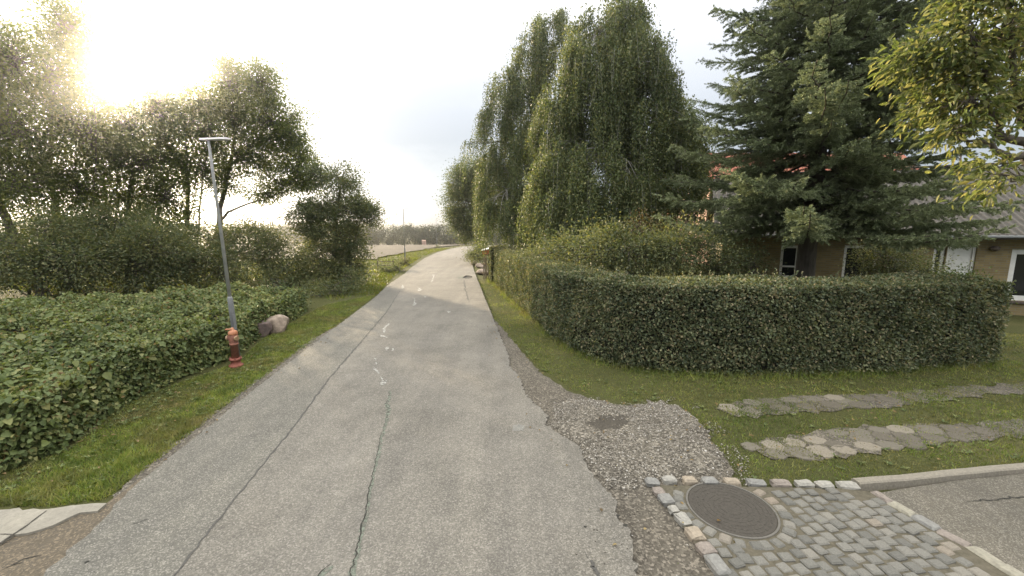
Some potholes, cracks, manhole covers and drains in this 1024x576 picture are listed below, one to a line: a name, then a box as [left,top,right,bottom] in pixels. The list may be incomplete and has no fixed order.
manhole cover [686,482,781,540]
crack [318,391,392,576]
